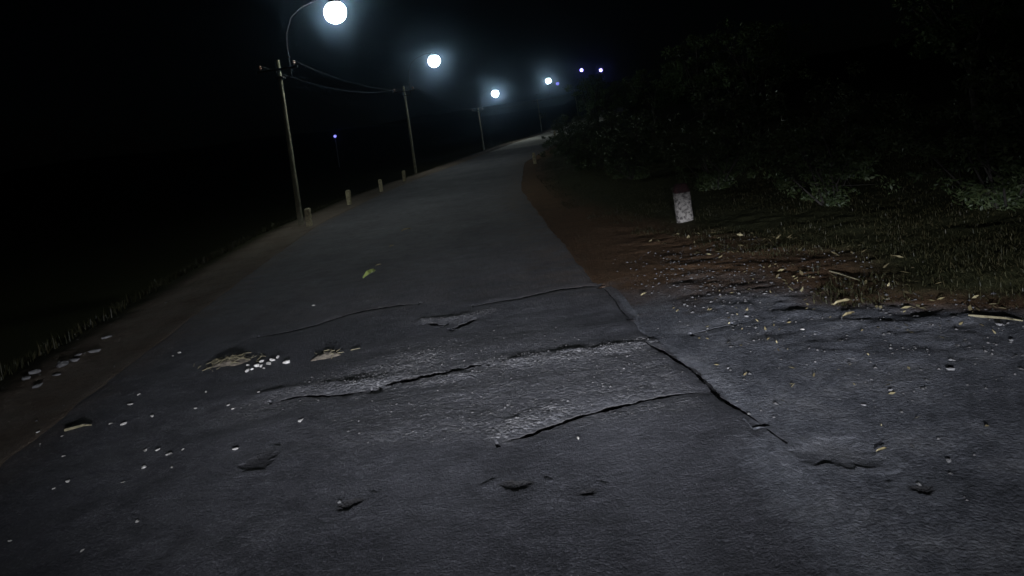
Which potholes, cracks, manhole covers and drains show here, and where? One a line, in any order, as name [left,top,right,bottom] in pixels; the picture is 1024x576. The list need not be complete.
pothole [769,430,909,476]
pothole [480,474,554,499]
crack [271,321,803,450]
crack [257,283,639,339]
pothole [558,480,613,503]
pothole [319,490,386,521]
pothole [225,444,292,478]
